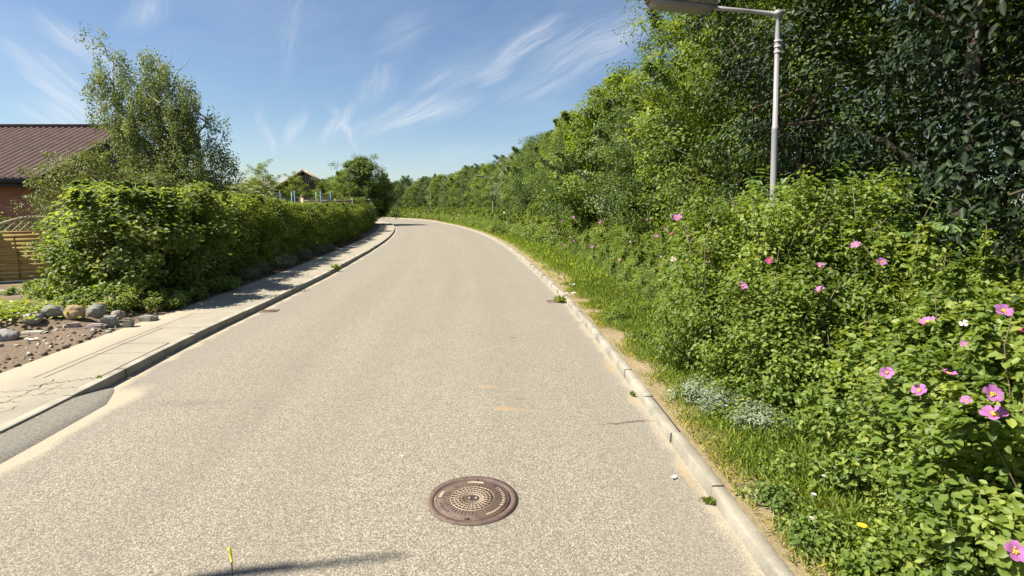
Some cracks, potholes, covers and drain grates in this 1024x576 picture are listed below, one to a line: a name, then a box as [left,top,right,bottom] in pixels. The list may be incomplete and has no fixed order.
manhole cover [428,476,518,526]
